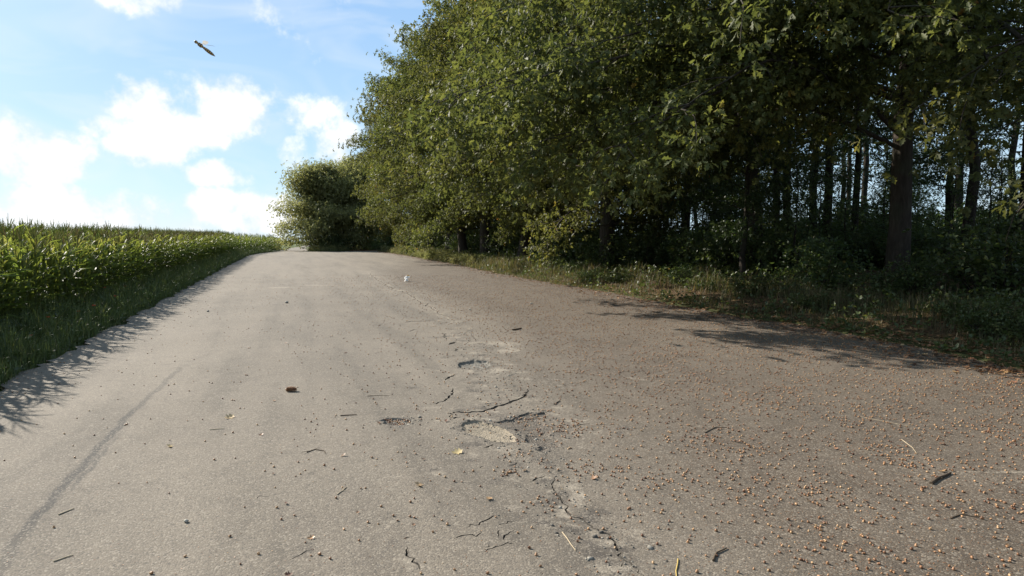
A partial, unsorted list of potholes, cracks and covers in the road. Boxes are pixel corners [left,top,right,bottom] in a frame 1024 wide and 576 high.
pothole [458,359,491,369]
pothole [460,420,516,443]
crack [404,537,420,569]
crack [454,515,516,552]
crack [436,375,529,419]
crack [480,463,644,576]
